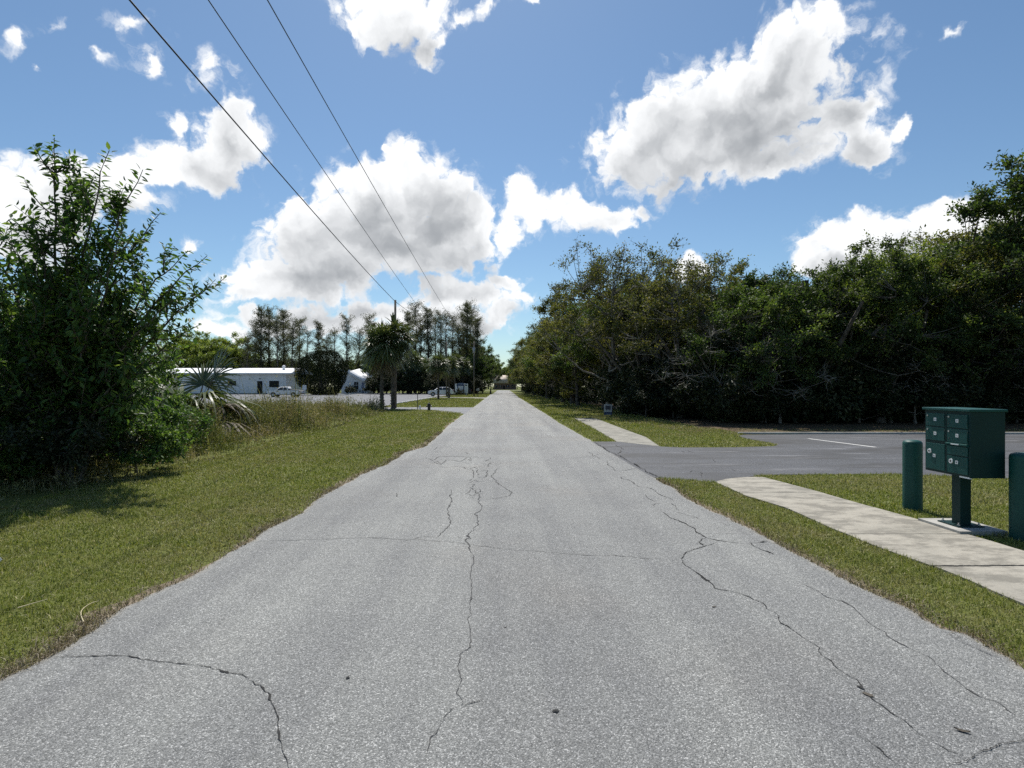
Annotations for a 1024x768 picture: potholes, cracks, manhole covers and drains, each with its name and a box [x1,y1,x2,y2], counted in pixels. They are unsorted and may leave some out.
crack [44,655,289,768]
crack [262,447,650,768]
crack [589,445,1023,764]
